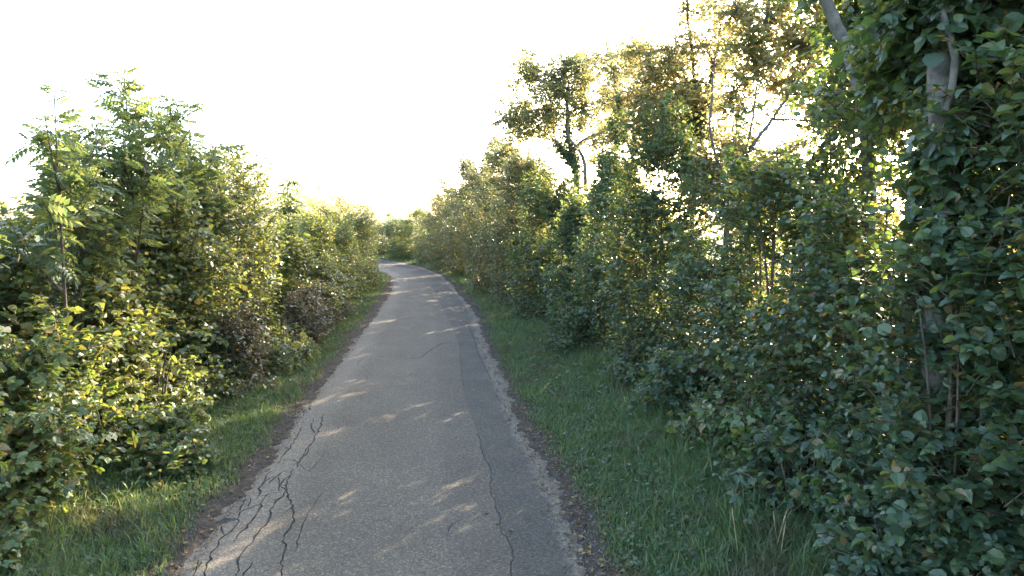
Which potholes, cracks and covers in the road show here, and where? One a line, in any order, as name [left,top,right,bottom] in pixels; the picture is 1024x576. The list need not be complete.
crack [192,414,339,576]
crack [415,321,491,379]
